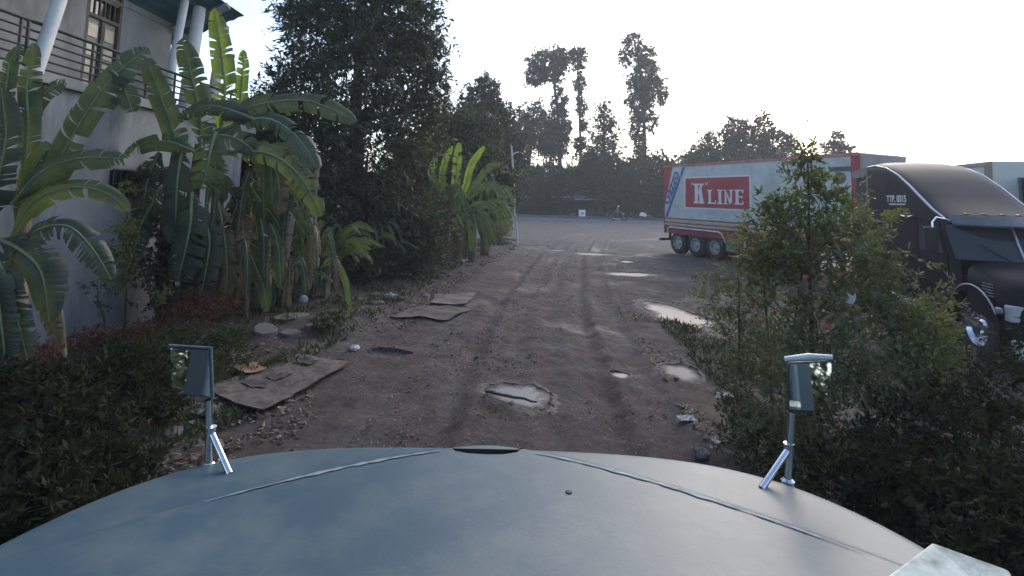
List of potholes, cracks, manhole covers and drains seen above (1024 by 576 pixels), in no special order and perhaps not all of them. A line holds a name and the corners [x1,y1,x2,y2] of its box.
pothole [632,299,742,336]
pothole [607,370,632,380]
pothole [652,362,706,384]
pothole [475,380,561,416]
pothole [362,346,418,360]
